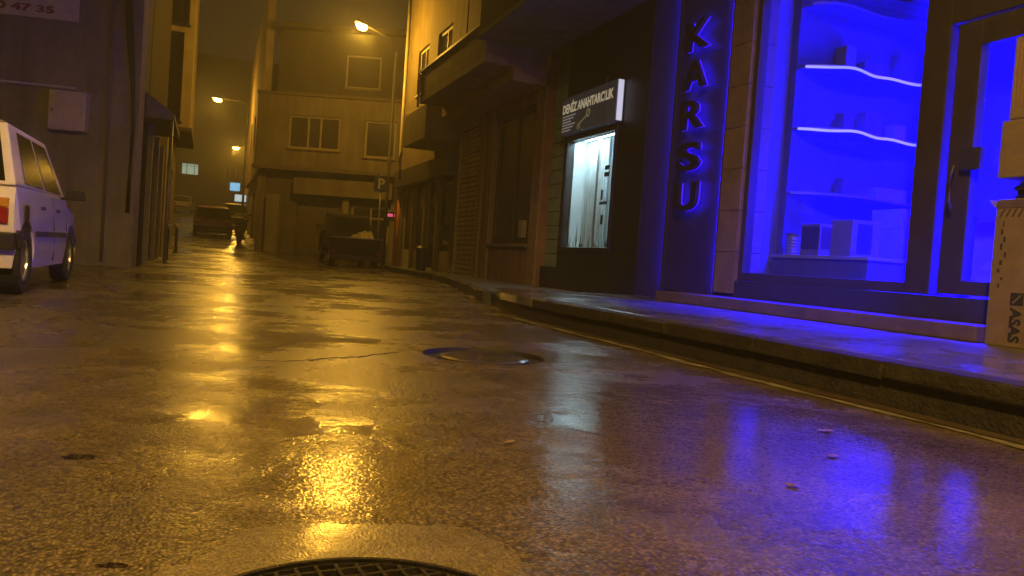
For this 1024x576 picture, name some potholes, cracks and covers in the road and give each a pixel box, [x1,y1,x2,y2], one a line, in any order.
crack [256,352,398,362]
manhole cover [422,347,545,365]
